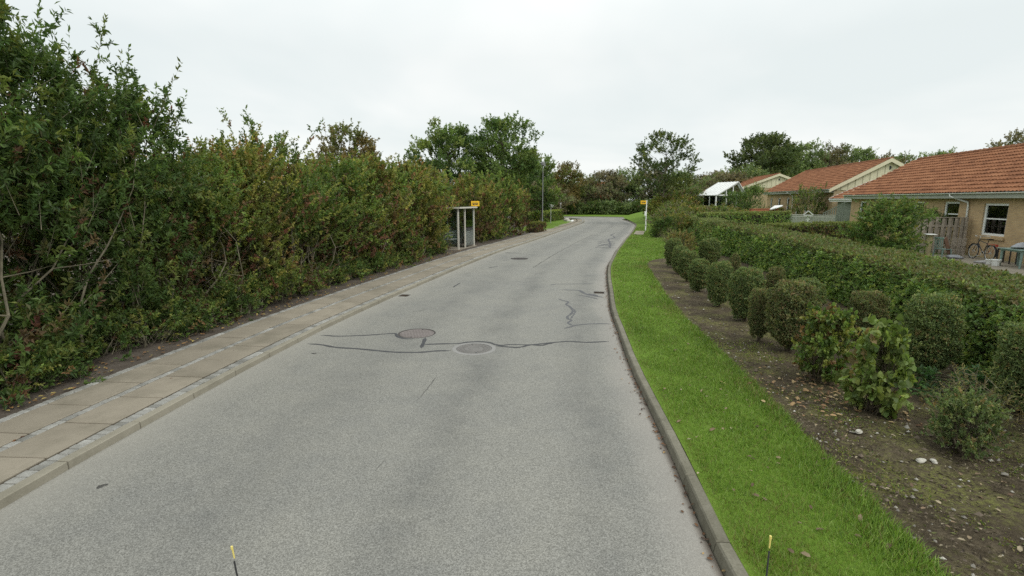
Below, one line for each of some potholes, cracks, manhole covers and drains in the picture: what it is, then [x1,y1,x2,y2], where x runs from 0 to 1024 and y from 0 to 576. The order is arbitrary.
manhole cover [398,329,436,338]
crack [595,233,621,248]
manhole cover [452,342,496,355]
